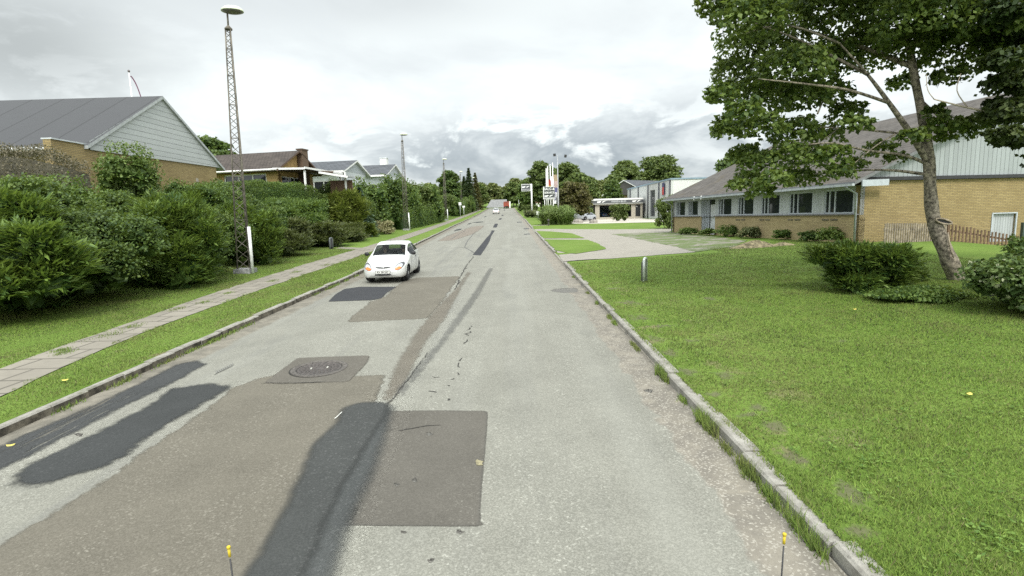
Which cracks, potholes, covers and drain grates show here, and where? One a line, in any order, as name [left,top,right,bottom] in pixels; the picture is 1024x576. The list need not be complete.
manhole cover [289,360,348,378]
